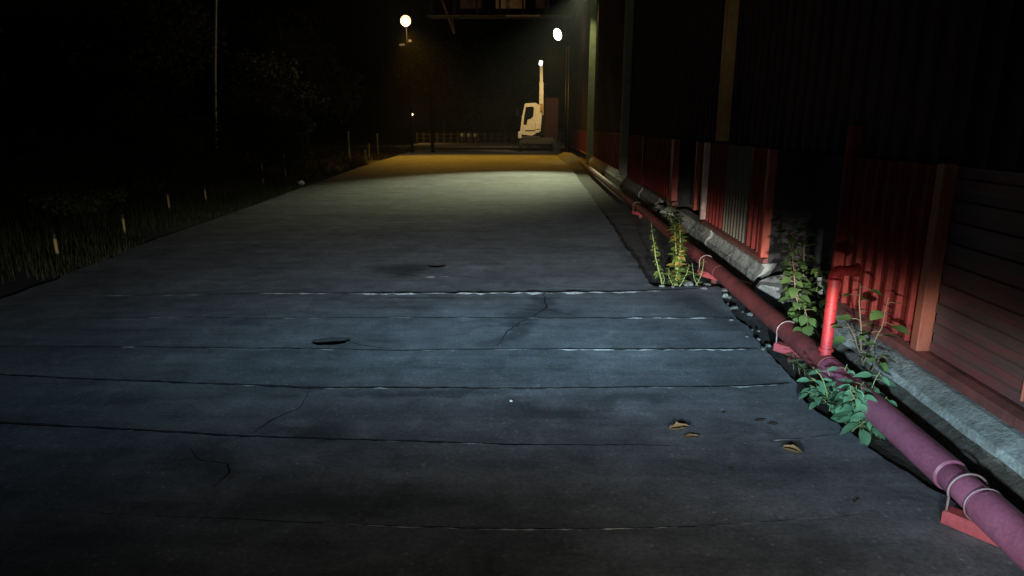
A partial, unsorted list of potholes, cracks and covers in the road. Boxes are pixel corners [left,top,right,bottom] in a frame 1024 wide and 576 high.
pothole [312,337,351,349]
crack [497,294,566,346]
crack [190,448,231,484]
